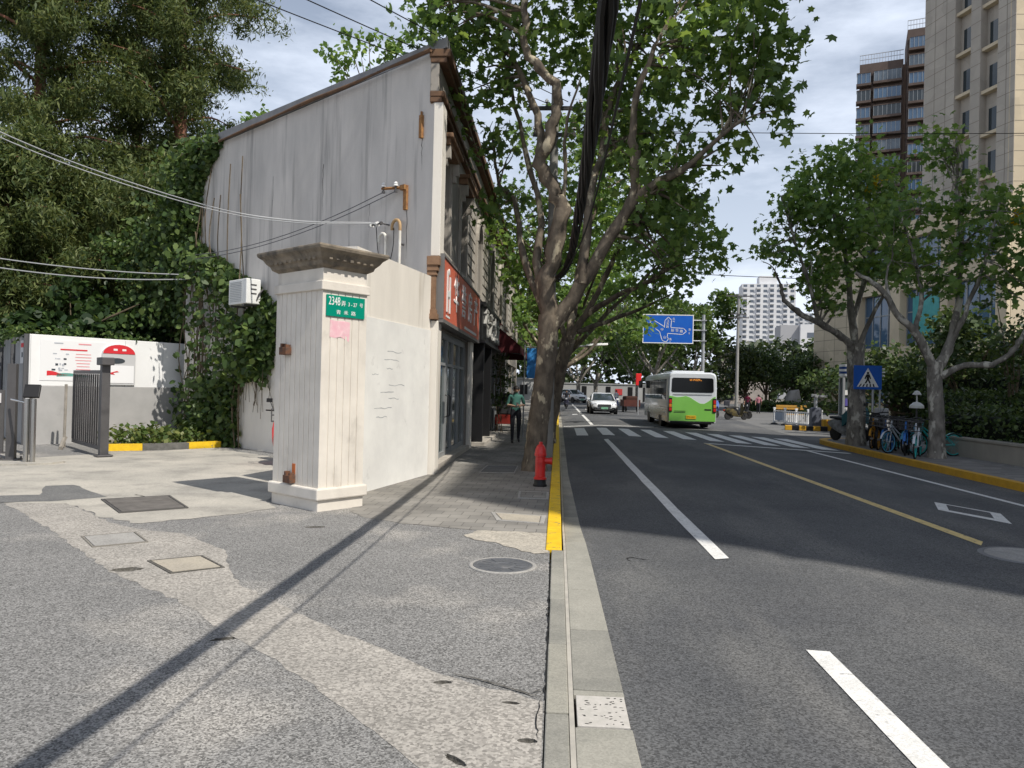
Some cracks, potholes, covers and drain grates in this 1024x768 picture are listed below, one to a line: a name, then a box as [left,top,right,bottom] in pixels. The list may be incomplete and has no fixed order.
manhole cover [479,465,518,473]
manhole cover [147,555,225,574]
manhole cover [491,512,546,524]
manhole cover [101,495,189,513]
manhole cover [977,547,1024,564]
manhole cover [518,491,549,499]
manhole cover [469,557,537,574]
manhole cover [81,531,148,548]
